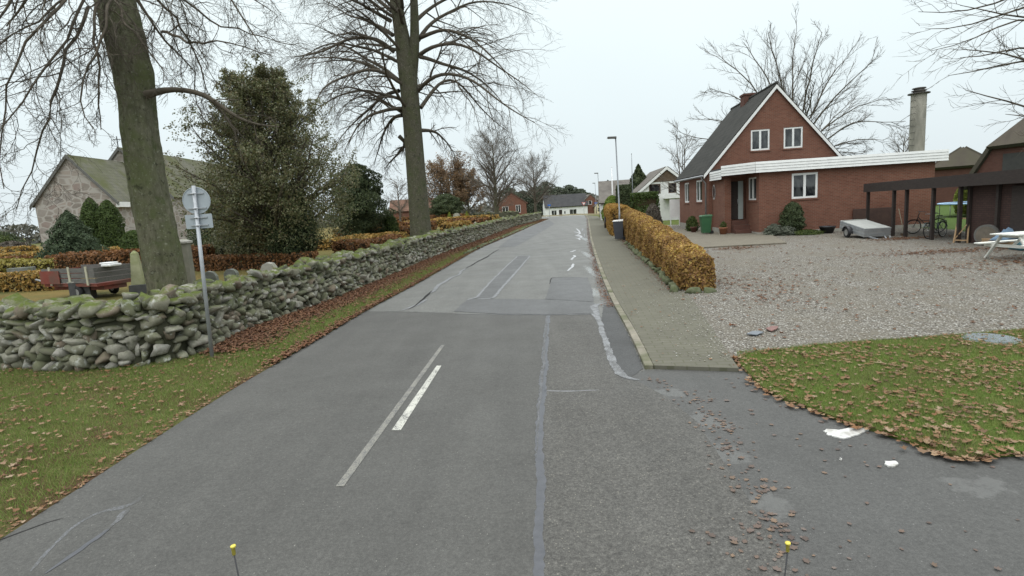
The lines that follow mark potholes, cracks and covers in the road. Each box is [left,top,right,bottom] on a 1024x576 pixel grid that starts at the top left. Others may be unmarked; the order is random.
crack [0,518,62,540]
